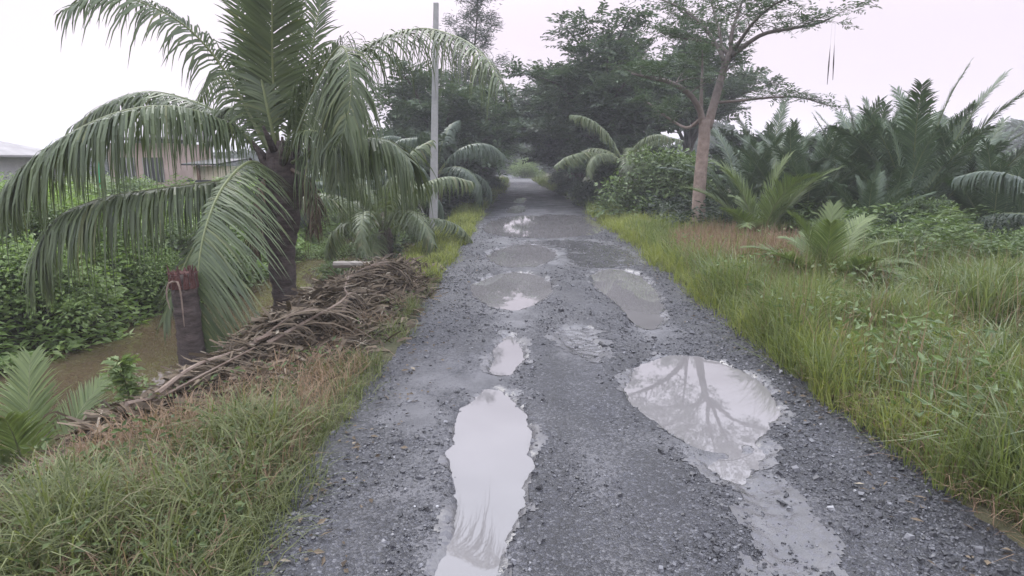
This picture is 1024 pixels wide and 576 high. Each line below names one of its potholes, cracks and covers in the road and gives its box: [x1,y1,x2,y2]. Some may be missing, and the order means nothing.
pothole [511,239,647,270]
pothole [415,507,523,576]
pothole [479,214,604,238]
pothole [544,324,616,363]
pothole [438,385,548,539]
pothole [712,474,849,576]
pothole [614,351,797,460]
pothole [468,270,559,311]
pothole [481,244,560,268]
pothole [584,268,671,330]
pothole [682,438,783,489]
pothole [479,330,533,376]
